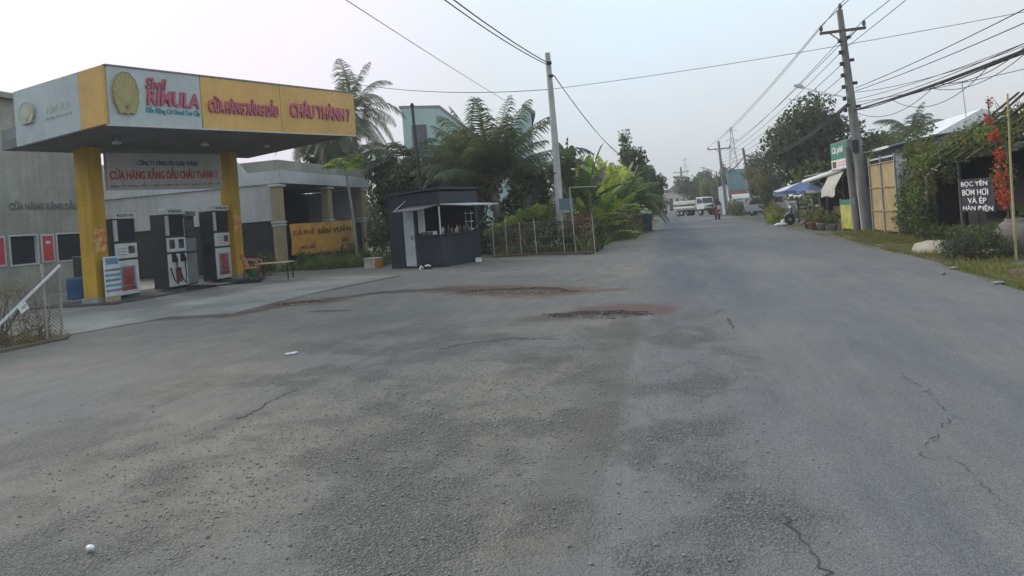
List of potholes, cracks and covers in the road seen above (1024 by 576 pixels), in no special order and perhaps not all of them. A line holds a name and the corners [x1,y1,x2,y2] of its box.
crack [904,376,1000,499]
crack [440,338,553,349]
crack [782,512,833,576]
pothole [541,310,655,319]
pothole [457,287,583,295]
